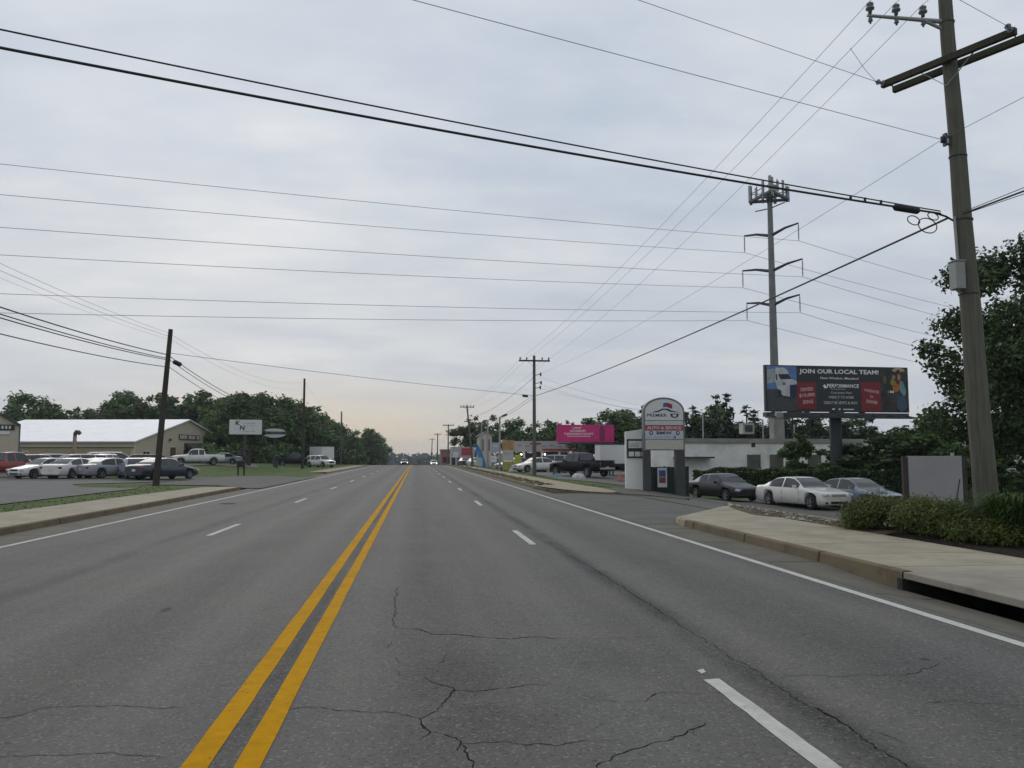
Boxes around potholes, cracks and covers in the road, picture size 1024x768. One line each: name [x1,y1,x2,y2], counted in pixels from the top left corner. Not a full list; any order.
crack [596,723,706,768]
crack [0,705,184,718]
crack [292,642,609,768]
crack [392,589,650,639]
